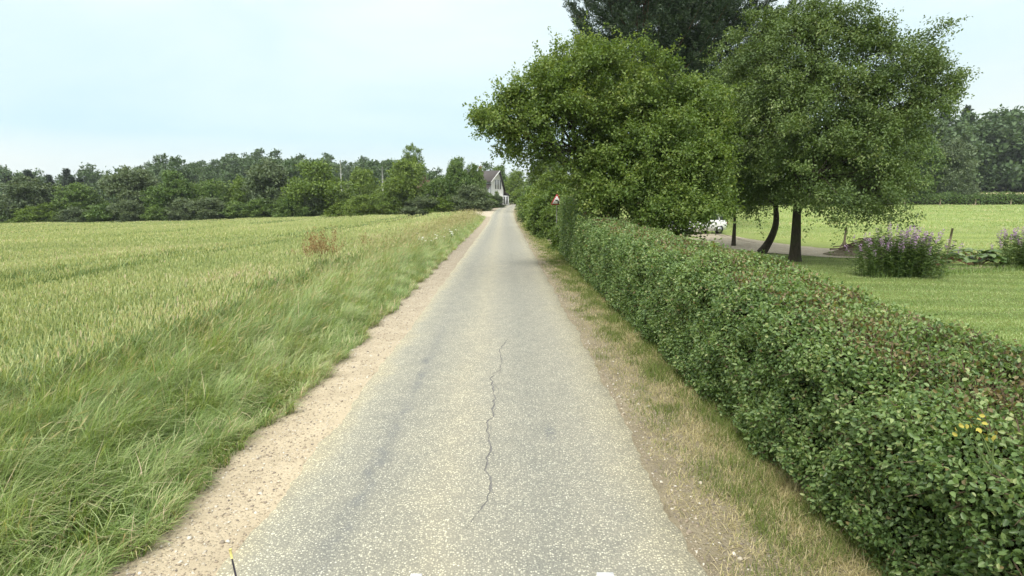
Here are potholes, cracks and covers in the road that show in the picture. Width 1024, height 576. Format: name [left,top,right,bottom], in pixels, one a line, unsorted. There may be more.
crack [468,340,507,526]
